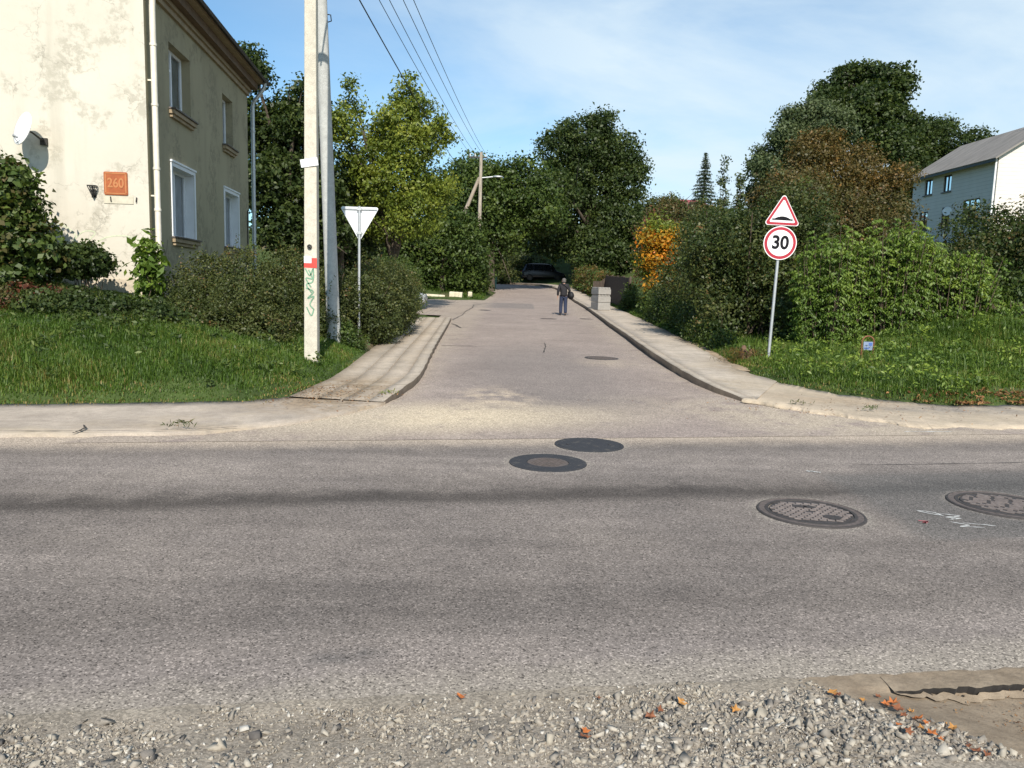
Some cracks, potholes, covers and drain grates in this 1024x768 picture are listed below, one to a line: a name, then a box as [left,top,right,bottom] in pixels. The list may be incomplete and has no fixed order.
manhole cover [554,438,624,452]
manhole cover [756,498,868,529]
manhole cover [509,454,587,472]
manhole cover [945,491,1024,520]
